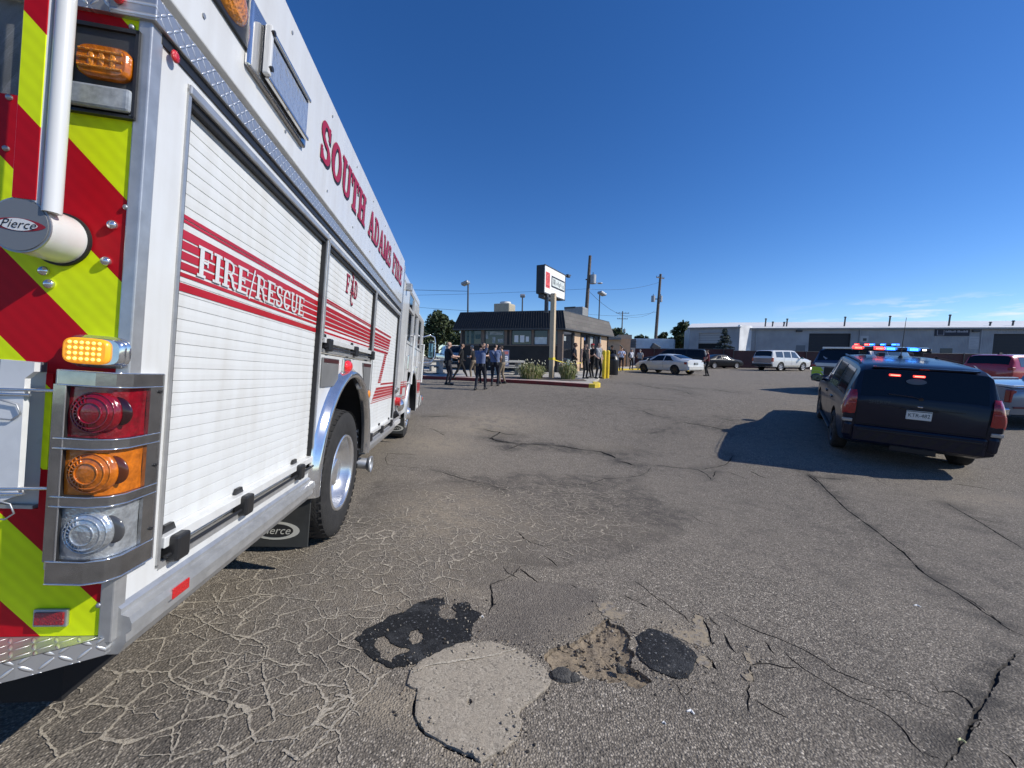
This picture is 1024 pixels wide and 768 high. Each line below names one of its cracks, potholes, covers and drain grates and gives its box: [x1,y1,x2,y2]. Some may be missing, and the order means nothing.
crack [488,533,575,615]
pothole [544,619,652,689]
crack [488,430,650,485]
crack [624,583,1017,768]
